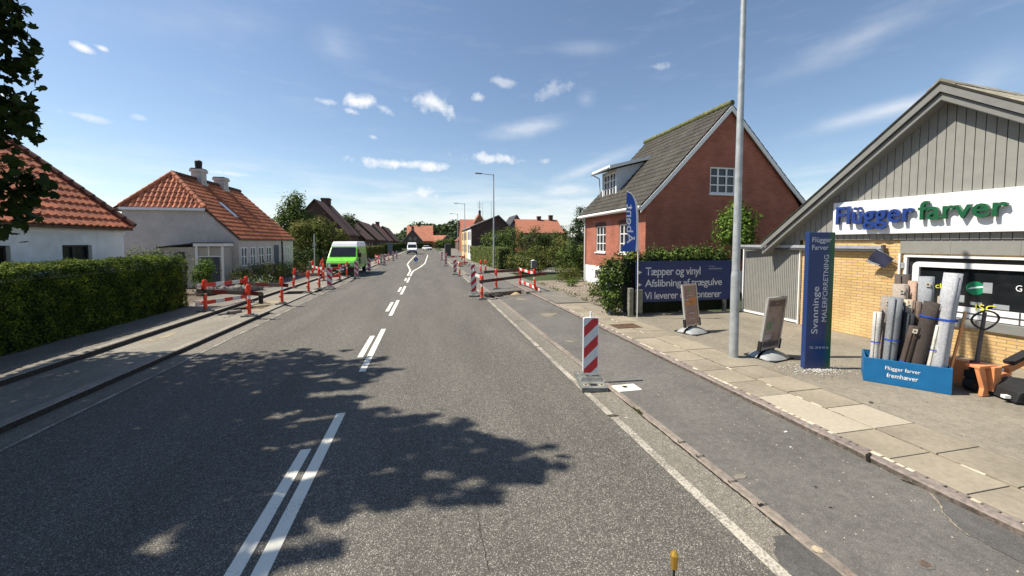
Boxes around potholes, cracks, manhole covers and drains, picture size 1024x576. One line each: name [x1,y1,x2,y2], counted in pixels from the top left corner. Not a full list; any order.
crack [901,479,970,536]
